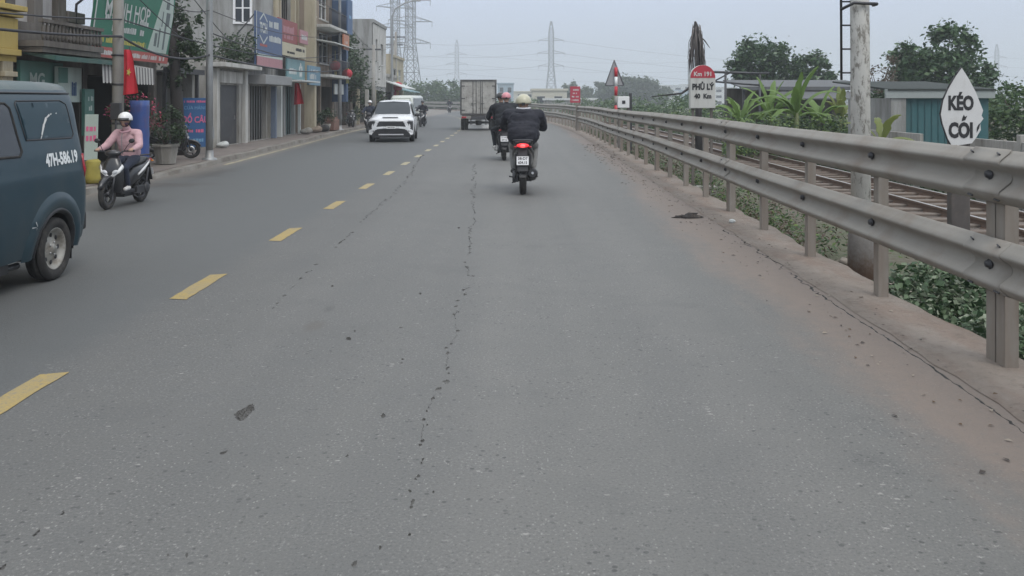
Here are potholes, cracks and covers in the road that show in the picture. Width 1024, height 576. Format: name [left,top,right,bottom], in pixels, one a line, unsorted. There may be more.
pothole [234,404,255,421]
crack [345,164,477,567]
crack [722,230,1024,433]
crack [272,155,424,309]
